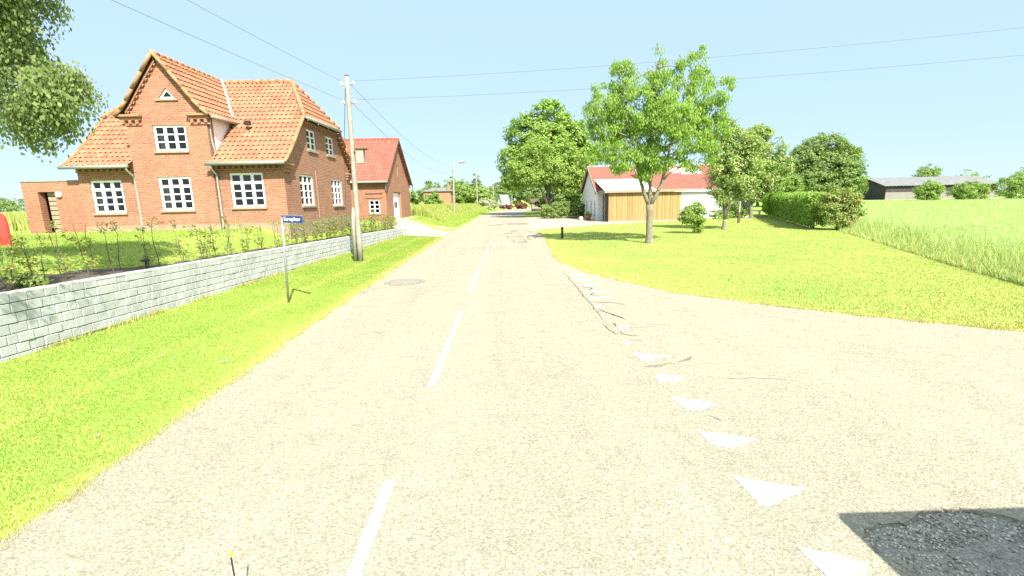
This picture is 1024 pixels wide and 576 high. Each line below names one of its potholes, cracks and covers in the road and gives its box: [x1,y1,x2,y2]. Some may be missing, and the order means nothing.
crack [564,273,673,341]
manhole cover [384,278,425,286]
crack [504,229,535,243]
